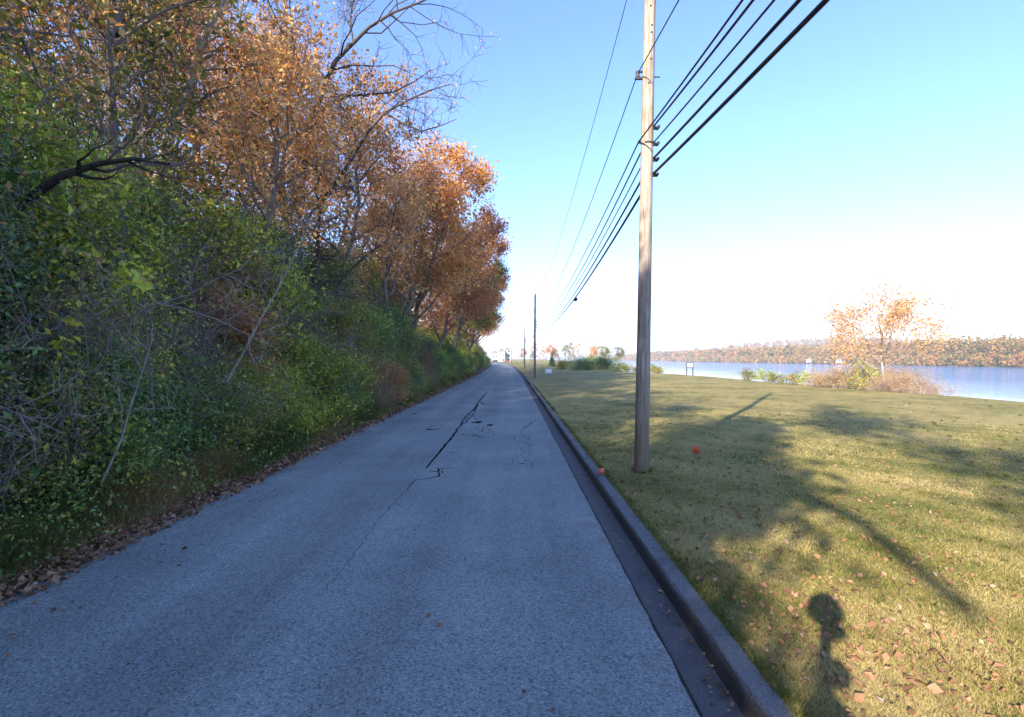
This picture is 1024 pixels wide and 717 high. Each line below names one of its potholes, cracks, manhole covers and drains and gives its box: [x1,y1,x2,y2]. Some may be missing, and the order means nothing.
crack [321,393,533,596]
